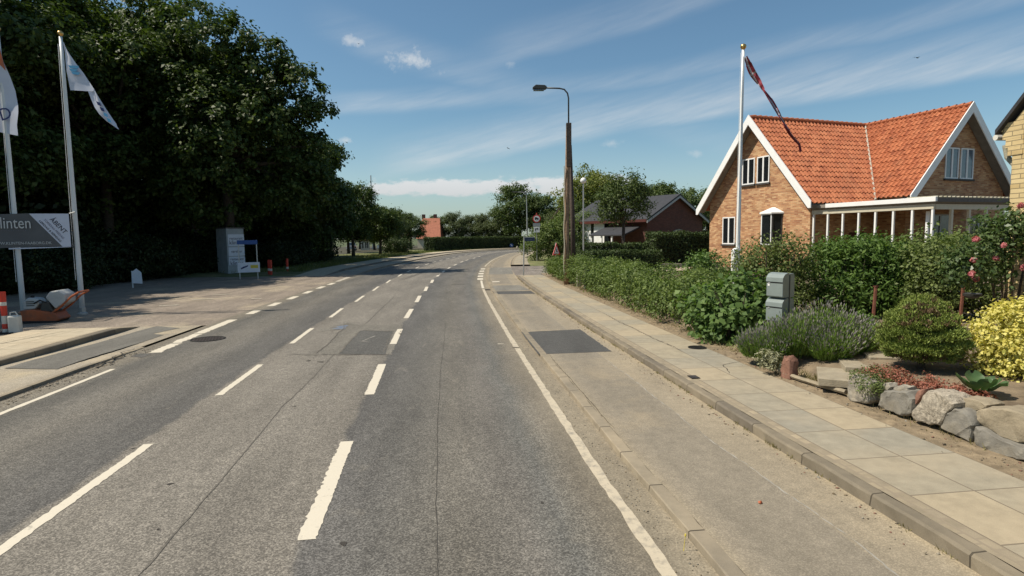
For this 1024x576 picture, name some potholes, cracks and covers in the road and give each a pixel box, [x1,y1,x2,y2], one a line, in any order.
crack [300,326,401,355]
crack [435,325,446,572]
